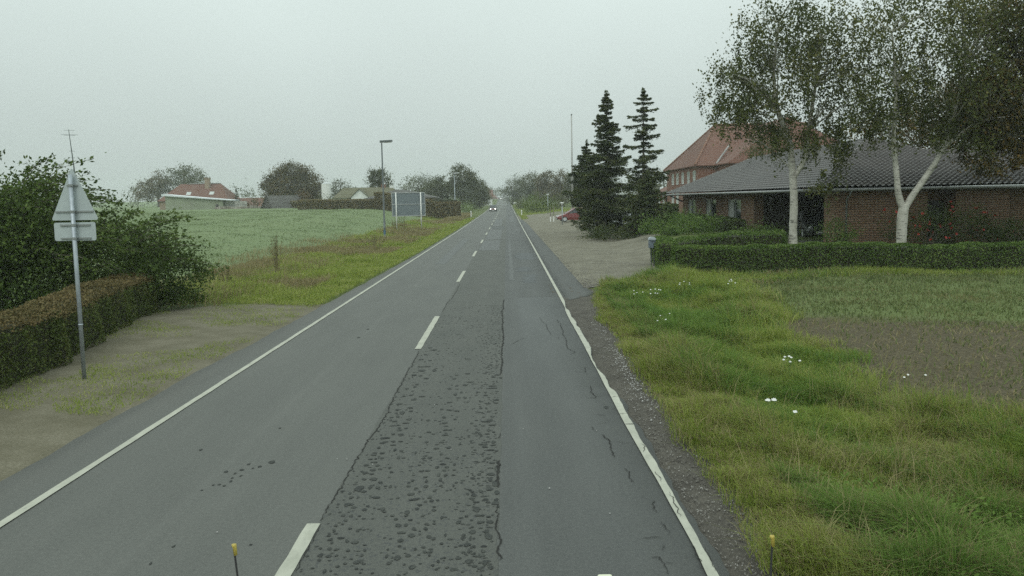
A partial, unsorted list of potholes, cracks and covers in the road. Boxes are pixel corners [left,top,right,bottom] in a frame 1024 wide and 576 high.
crack [643,472,680,573]
crack [579,369,645,481]
